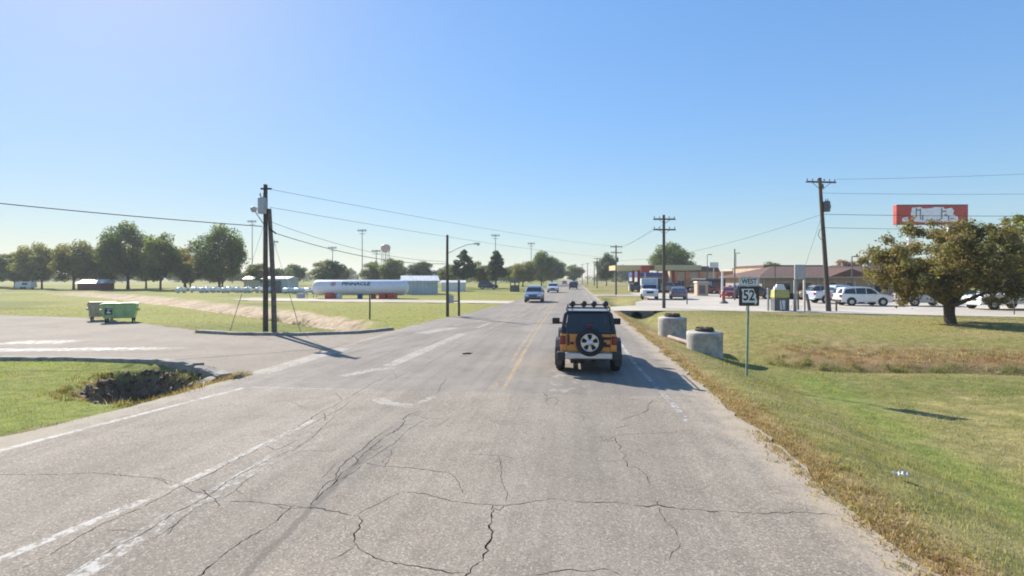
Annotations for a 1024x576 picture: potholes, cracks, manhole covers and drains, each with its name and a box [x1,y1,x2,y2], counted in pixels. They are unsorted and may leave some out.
crack [0,377,829,576]
